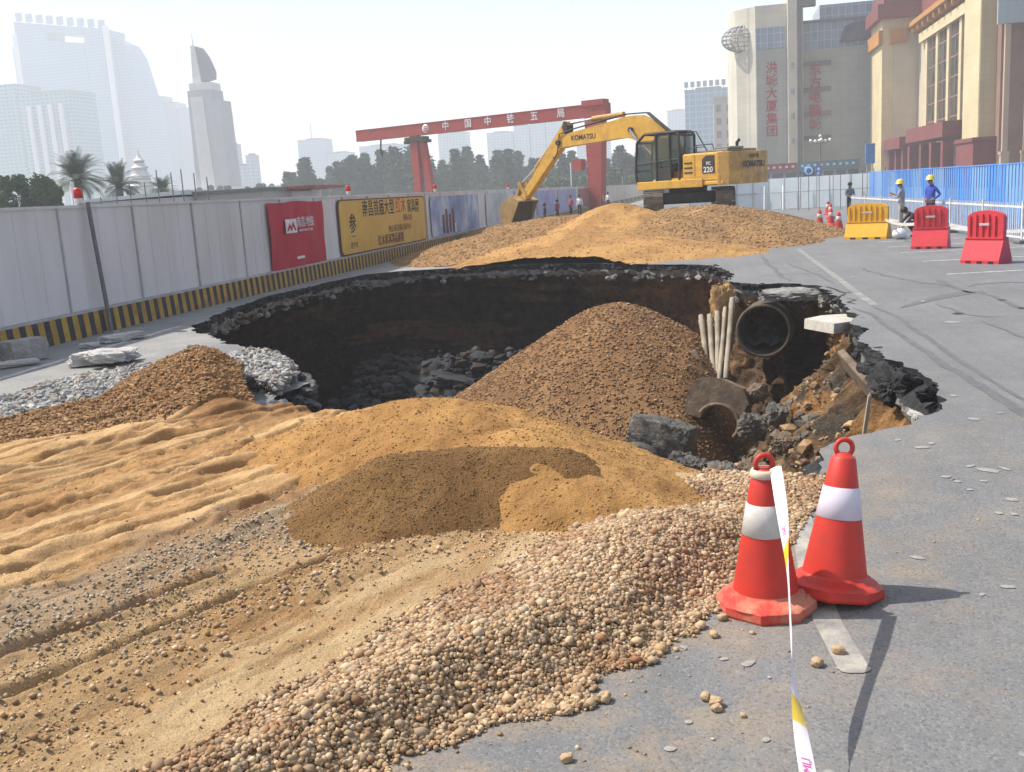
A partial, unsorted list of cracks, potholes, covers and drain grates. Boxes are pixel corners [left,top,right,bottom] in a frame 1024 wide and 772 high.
crack [935,303,1024,338]
